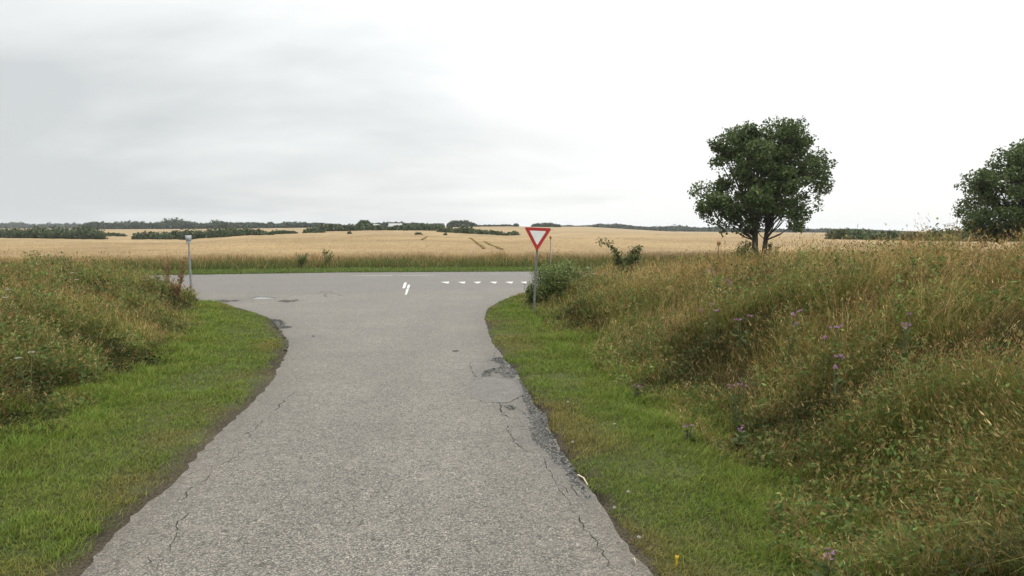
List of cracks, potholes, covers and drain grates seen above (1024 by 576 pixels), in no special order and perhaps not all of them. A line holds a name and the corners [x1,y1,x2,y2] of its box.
crack [109,391,296,572]
crack [472,396,611,568]
pothole [481,357,519,379]
pothole [268,318,291,330]
